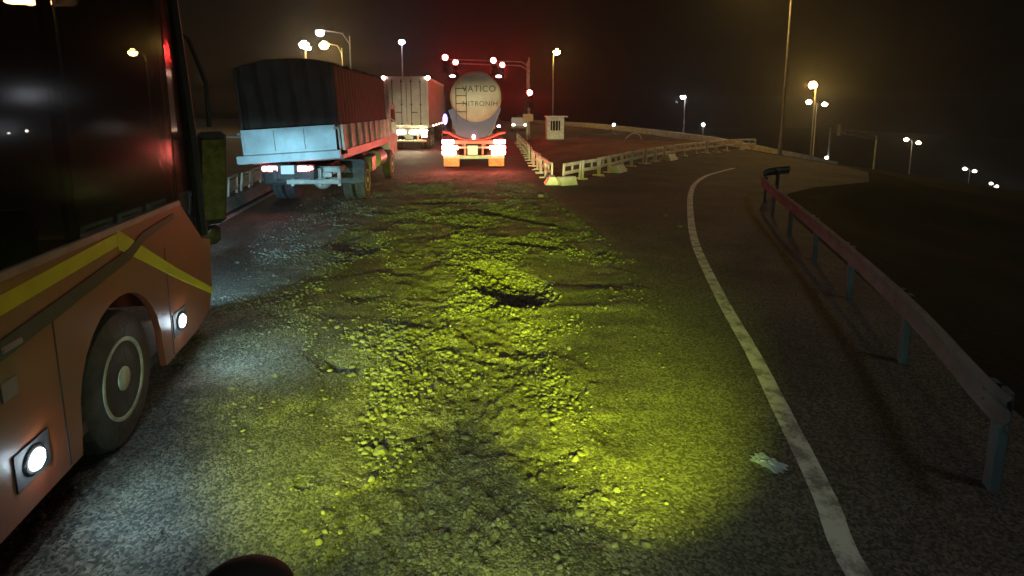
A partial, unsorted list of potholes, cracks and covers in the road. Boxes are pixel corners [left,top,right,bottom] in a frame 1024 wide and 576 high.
pothole [455,259,561,312]
